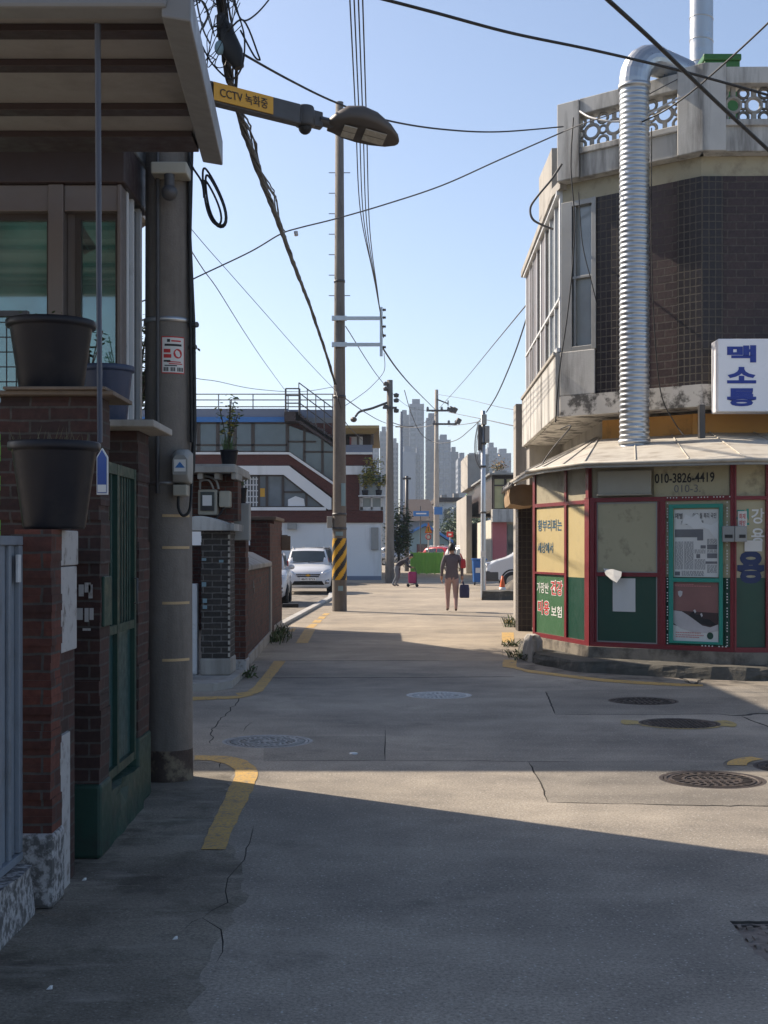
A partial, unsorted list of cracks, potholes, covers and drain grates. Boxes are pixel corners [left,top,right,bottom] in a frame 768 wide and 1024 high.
manhole cover [753,760,768,771]
manhole cover [407,691,472,699]
crack [192,829,253,961]
pothole [730,920,768,963]
manhole cover [222,735,313,748]
manhole cover [659,770,767,789]
crack [209,699,252,744]
manhole cover [639,718,721,728]
manhole cover [608,697,679,705]
